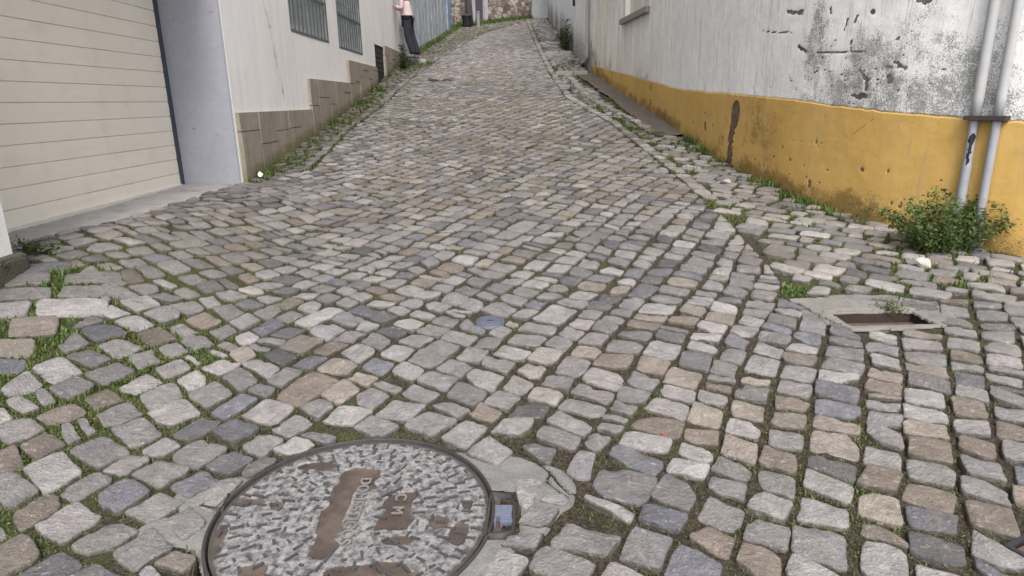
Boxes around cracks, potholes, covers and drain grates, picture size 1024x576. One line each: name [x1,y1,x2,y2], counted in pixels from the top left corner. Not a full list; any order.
crack [502,444,576,497]
manhole cover [199,438,516,576]
drain grate [789,297,947,332]
utility cover [476,315,505,329]
